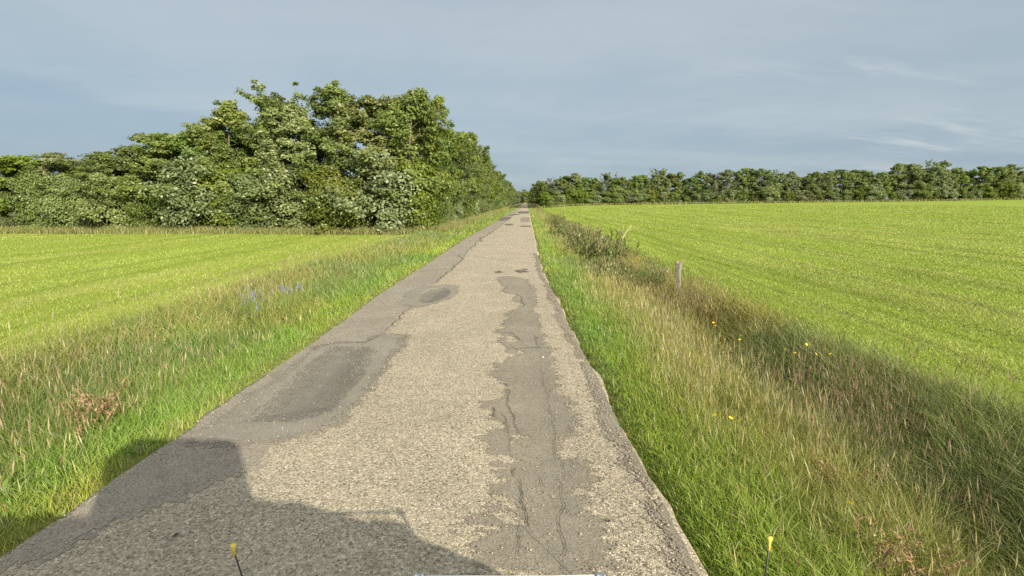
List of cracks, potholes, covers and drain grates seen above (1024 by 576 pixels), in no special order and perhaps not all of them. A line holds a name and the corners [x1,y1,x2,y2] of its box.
crack [493,373,573,564]
